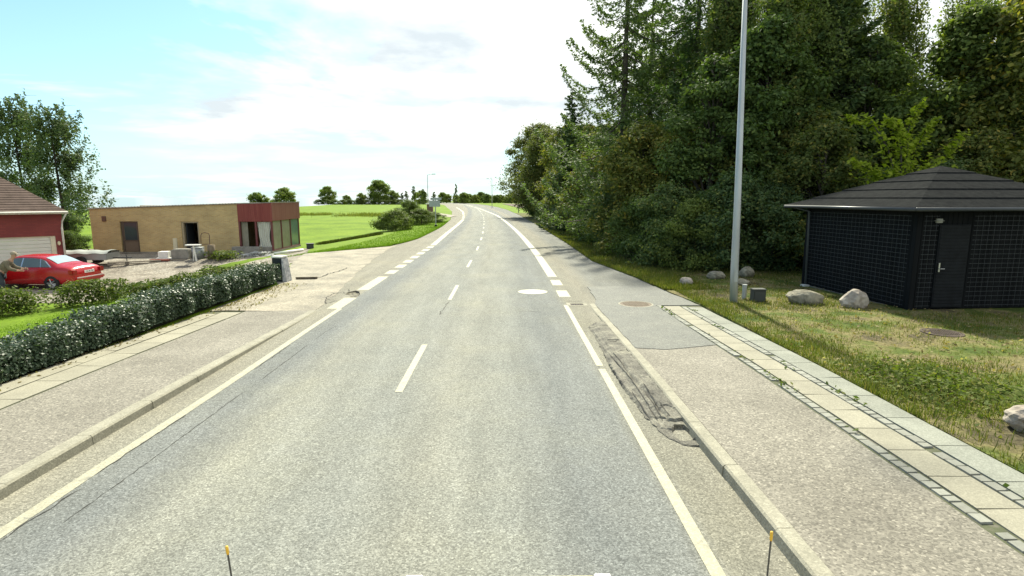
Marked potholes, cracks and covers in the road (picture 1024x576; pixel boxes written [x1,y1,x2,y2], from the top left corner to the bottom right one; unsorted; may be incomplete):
manhole cover [919,328,965,337]
